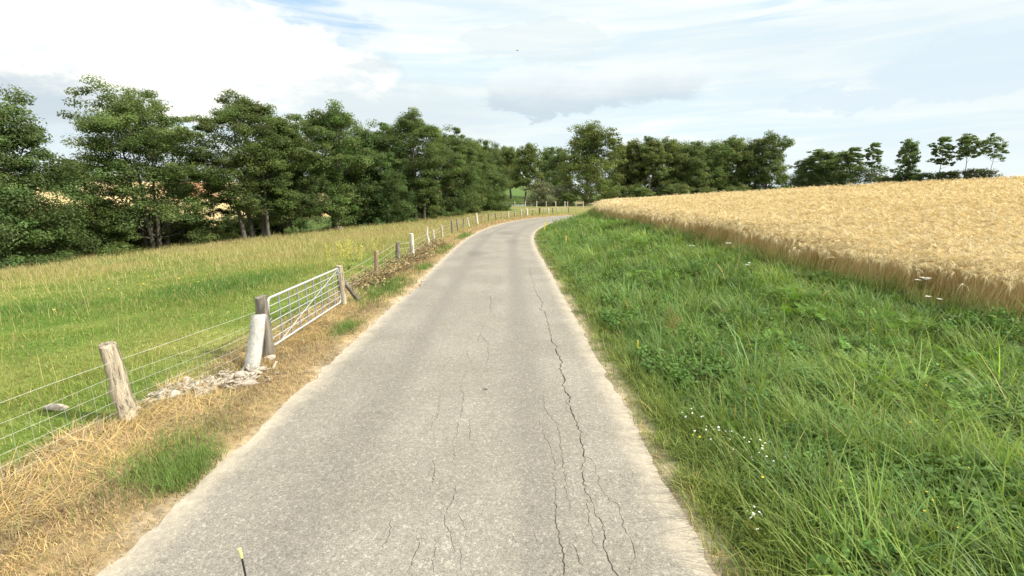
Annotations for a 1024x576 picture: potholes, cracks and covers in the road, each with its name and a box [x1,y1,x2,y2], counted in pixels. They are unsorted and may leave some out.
crack [407,460,467,572]
crack [529,266,635,576]
